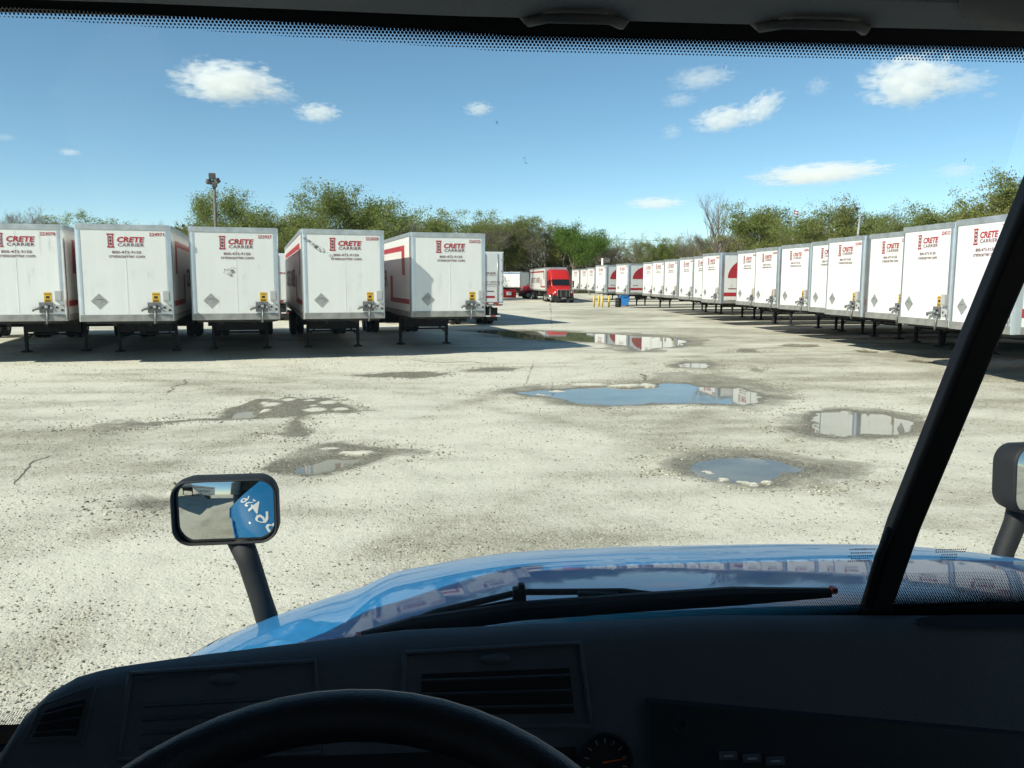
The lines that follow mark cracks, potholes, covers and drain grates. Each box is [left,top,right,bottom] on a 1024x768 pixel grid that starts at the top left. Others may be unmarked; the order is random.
pothole [455,329,711,352]
pothole [662,360,727,370]
pothole [773,406,927,445]
pothole [253,441,435,478]
pothole [653,448,888,491]
pothole [478,371,799,412]
pothole [135,396,360,438]
